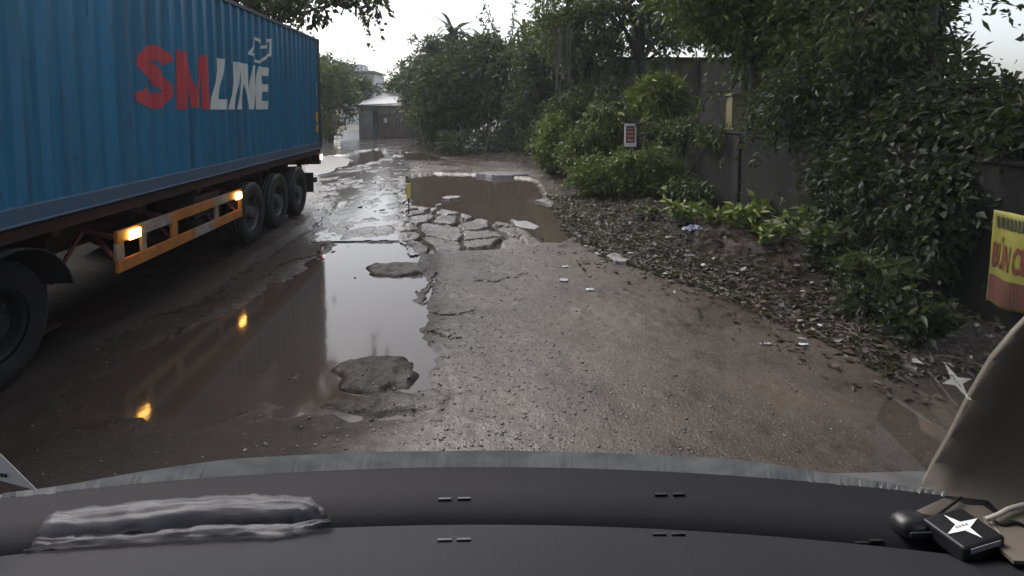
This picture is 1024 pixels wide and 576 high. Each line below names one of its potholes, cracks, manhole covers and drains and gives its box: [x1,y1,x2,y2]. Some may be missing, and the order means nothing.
pothole [328,148,387,169]
crack [400,208,520,253]
pothole [404,172,577,243]
crack [423,272,476,339]
pothole [39,240,469,447]
